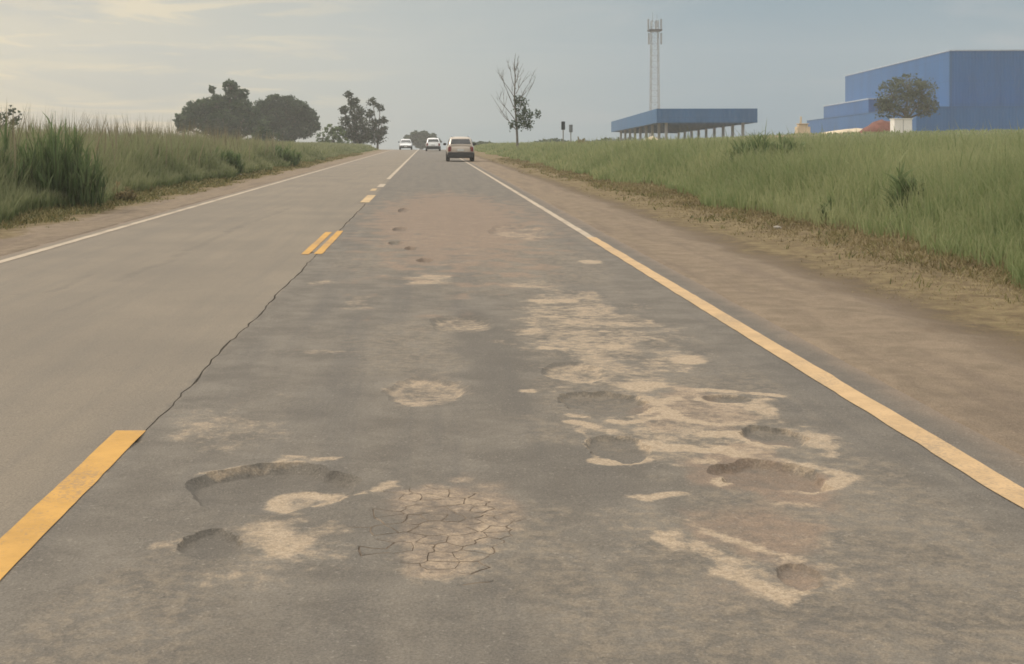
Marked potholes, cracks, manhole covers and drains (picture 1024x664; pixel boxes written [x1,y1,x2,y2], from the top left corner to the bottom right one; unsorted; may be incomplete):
pothole [707,458,835,493]
pothole [739,425,811,447]
crack [353,486,521,585]
pothole [776,563,824,591]
pothole [185,462,363,516]
pothole [584,435,653,464]
pothole [557,391,652,417]
pothole [176,528,244,560]
pothole [701,395,754,403]
